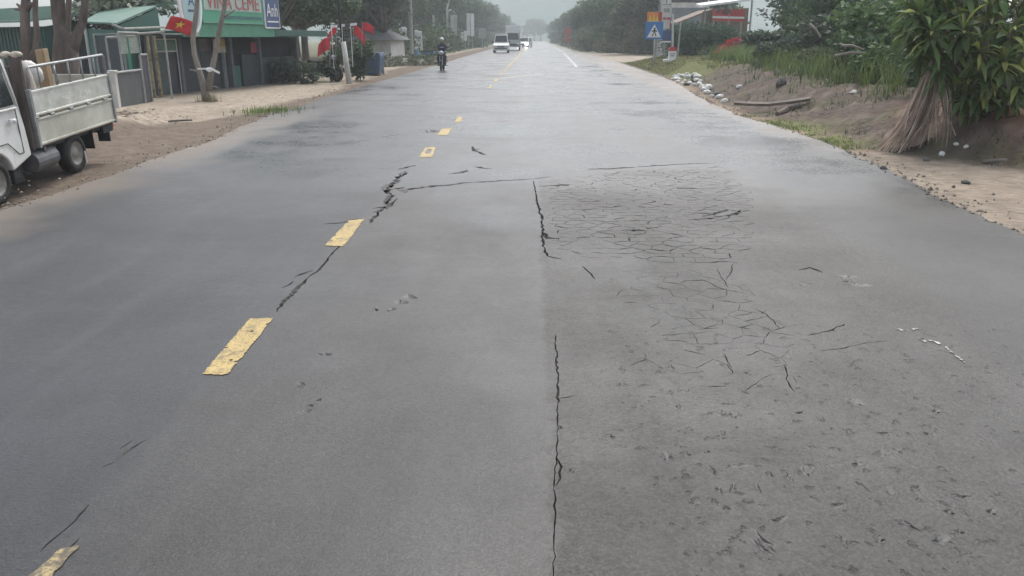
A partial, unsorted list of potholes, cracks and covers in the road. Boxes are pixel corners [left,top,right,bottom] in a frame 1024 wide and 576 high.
crack [552,335,575,576]
crack [327,147,797,390]
